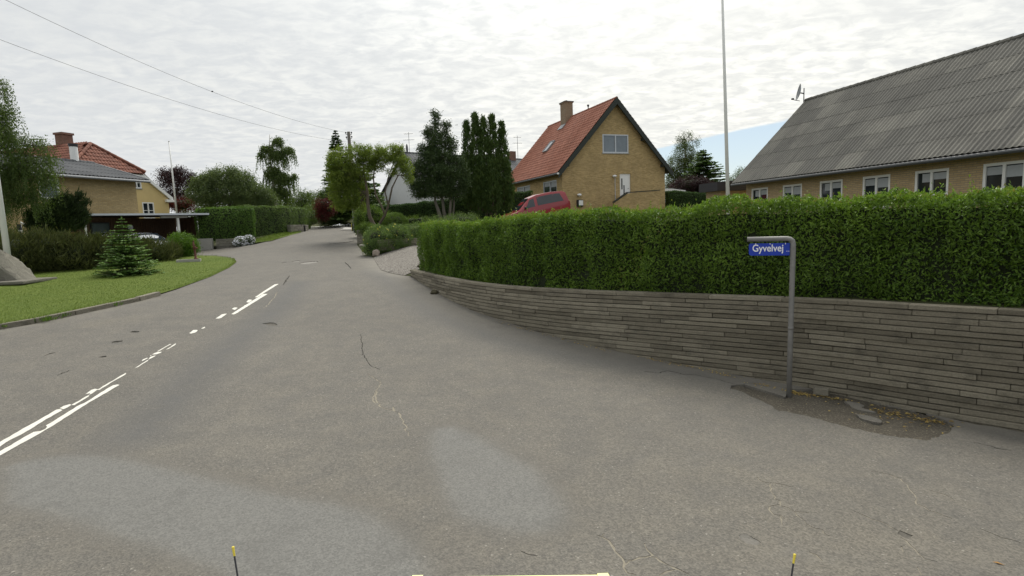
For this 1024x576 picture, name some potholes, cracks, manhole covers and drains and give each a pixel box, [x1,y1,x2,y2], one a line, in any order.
crack [757,477,827,535]
crack [360,337,409,435]
crack [600,534,687,576]
crack [857,473,953,575]
